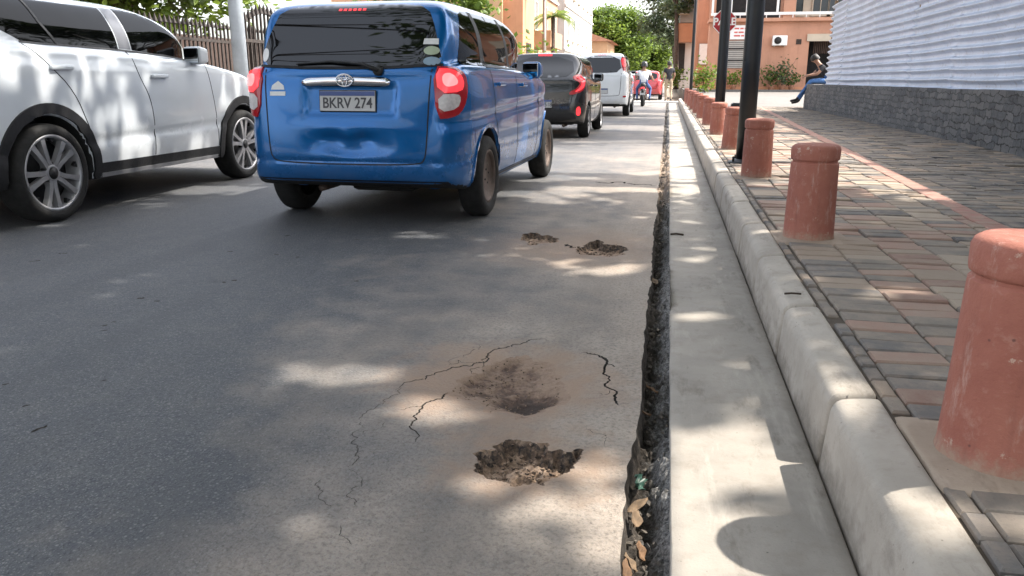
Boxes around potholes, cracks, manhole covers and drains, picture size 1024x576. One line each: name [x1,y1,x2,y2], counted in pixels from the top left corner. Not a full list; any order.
pothole [473,439,584,487]
crack [582,352,618,405]
pothole [575,240,628,257]
pothole [520,233,559,246]
crack [315,339,537,508]
pothole [445,355,571,420]
